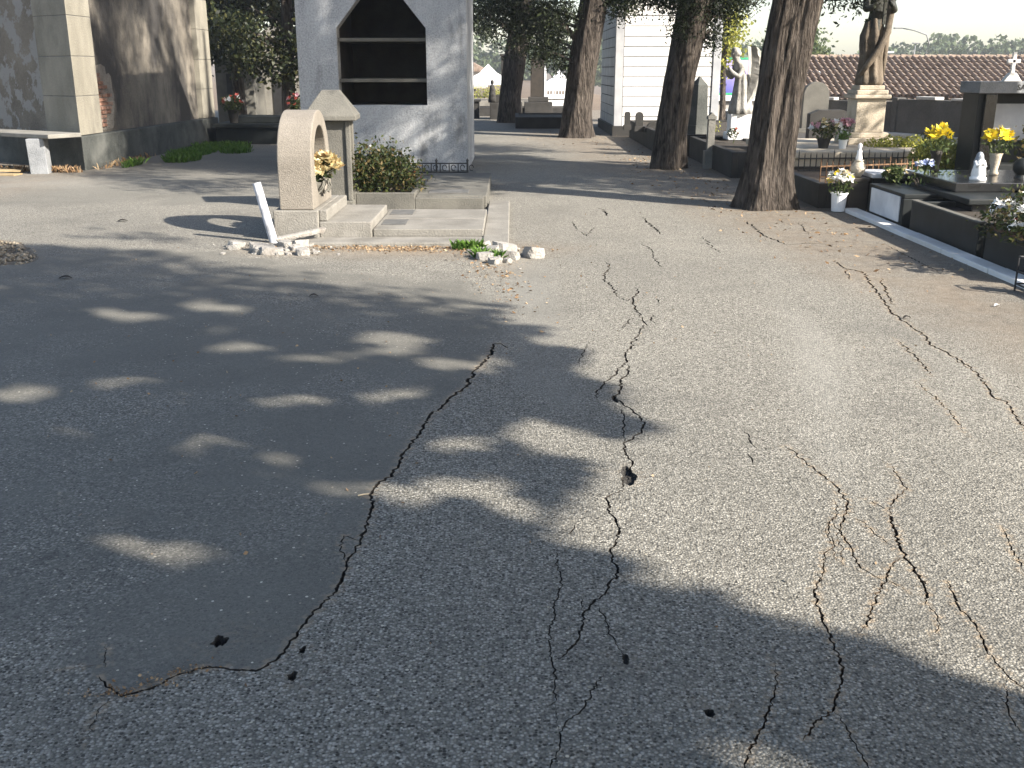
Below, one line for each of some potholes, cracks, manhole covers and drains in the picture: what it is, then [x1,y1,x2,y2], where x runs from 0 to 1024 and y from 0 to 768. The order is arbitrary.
crack [547,263,659,768]
crack [833,260,1024,430]
pothole [209,635,229,648]
crack [743,665,779,768]
crack [785,446,1024,768]
pothole [620,466,638,486]
crack [84,343,508,738]
